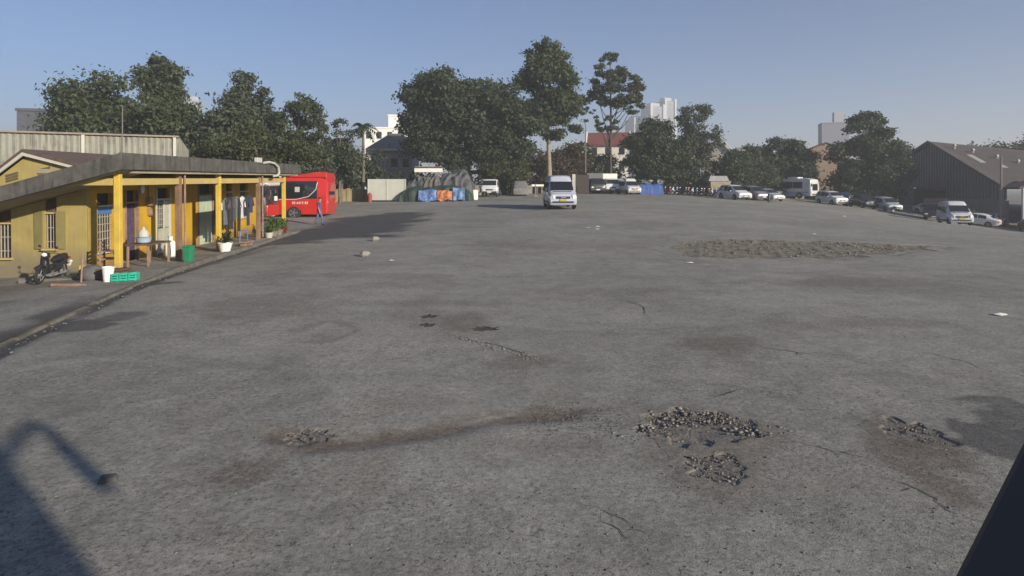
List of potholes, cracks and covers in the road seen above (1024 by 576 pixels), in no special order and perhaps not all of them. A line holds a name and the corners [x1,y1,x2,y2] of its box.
pothole [460,324,507,333]
pothole [264,422,353,453]
pothole [618,402,781,457]
pothole [662,443,768,495]
pothole [851,410,981,454]
crack [594,506,644,547]
